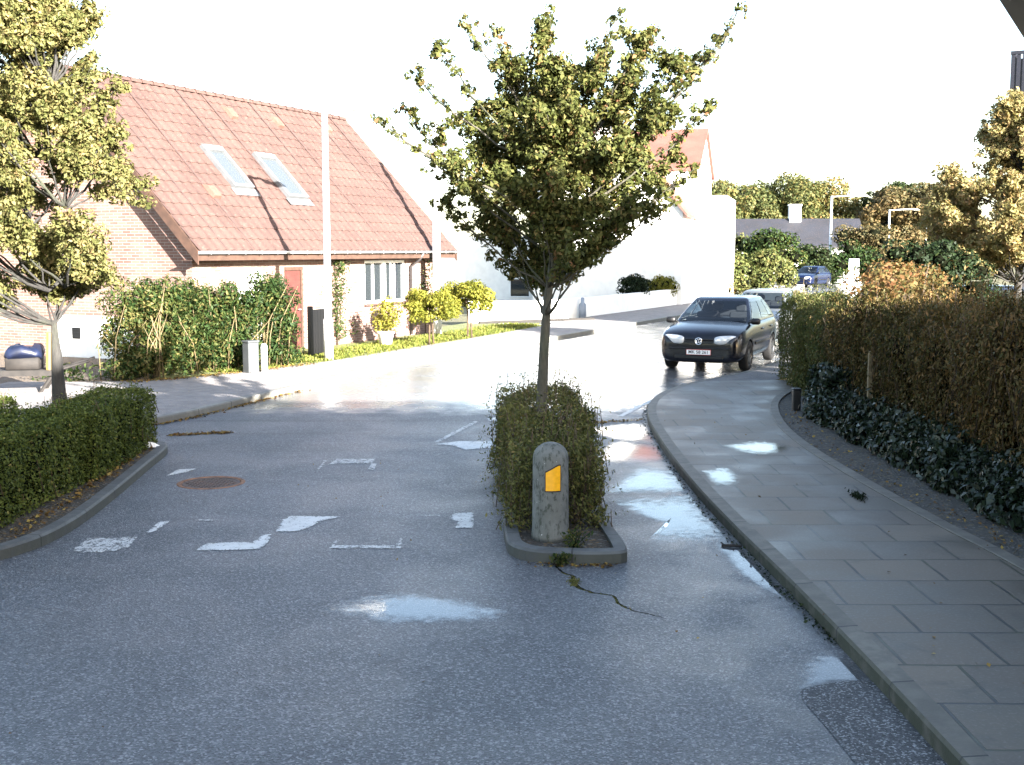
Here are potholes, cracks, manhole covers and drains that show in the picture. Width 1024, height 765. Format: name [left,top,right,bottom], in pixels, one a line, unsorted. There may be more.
manhole cover [176,476,245,489]
crack [557,567,663,618]
